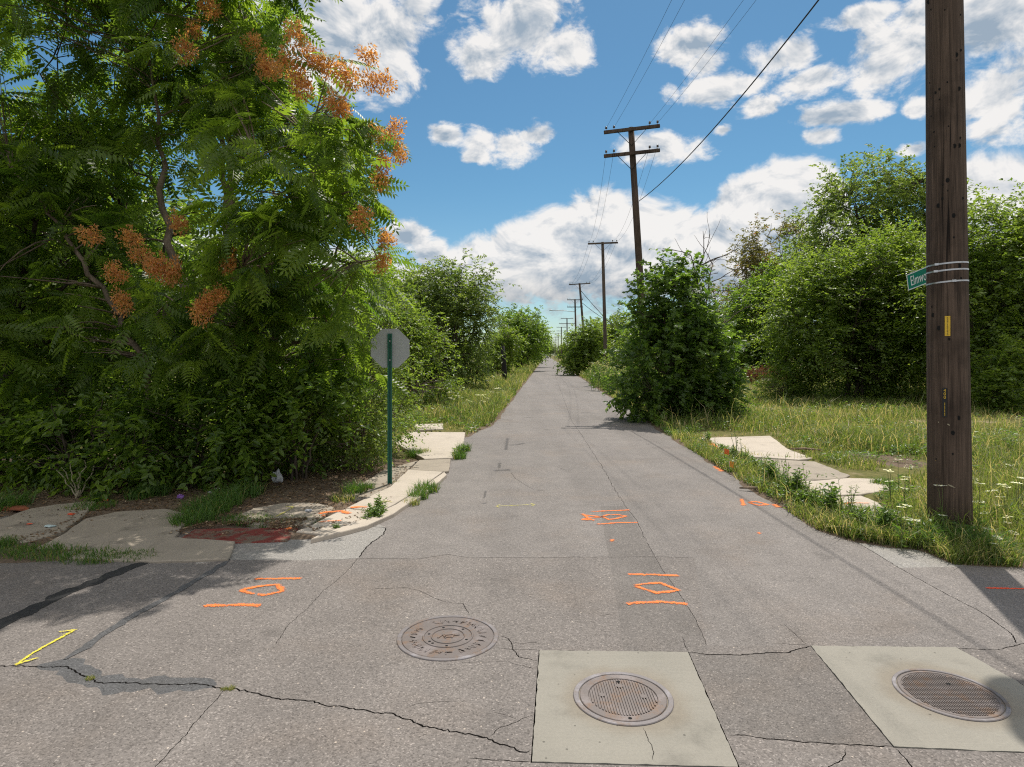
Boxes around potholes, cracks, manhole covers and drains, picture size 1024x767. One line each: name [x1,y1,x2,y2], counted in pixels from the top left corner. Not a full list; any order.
manhole cover [397,615,499,661]
crack [2,665,529,767]
manhole cover [573,672,674,727]
manhole cover [892,668,1011,722]
